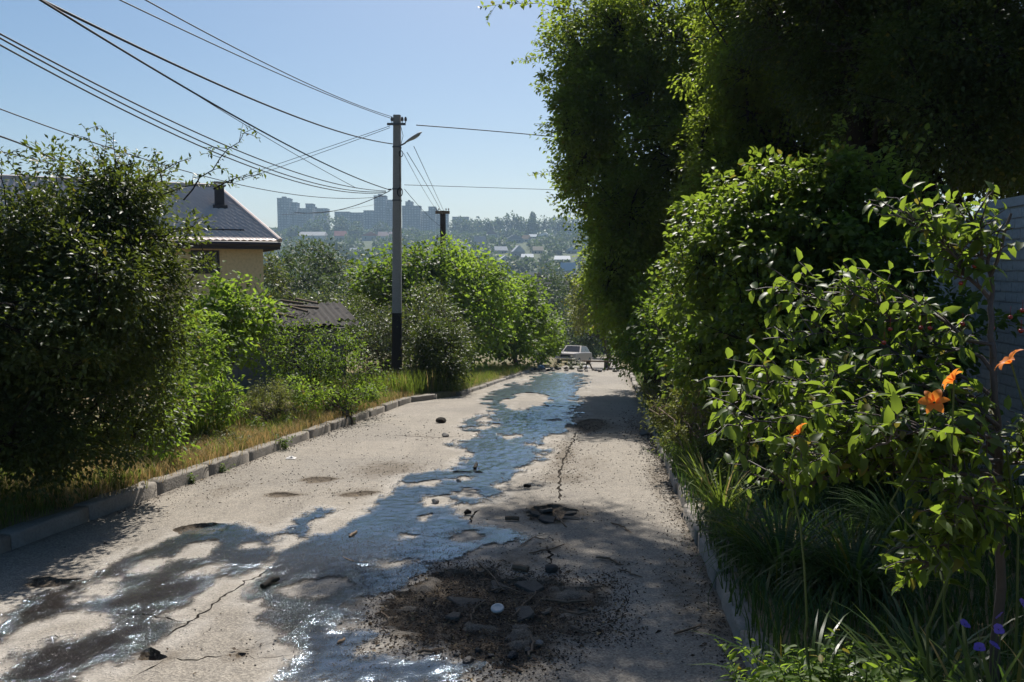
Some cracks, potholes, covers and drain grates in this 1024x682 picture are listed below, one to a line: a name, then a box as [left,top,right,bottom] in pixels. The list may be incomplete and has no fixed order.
crack [556,433,576,501]
pothole [379,568,605,670]
pothole [138,647,167,661]
pothole [526,504,578,524]
crack [132,655,289,677]
pothole [27,577,82,588]
pothole [173,522,238,535]
pothole [574,419,606,432]
